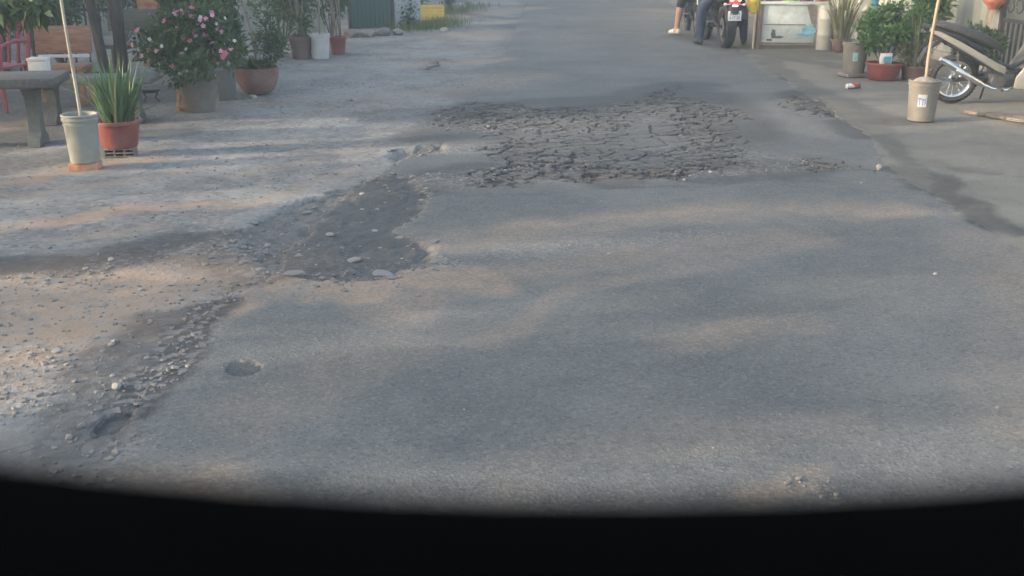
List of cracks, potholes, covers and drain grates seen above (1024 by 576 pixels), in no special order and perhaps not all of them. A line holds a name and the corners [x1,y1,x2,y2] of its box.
pothole [213,169,463,289]
pothole [76,401,151,444]
crack [393,55,899,195]
pothole [208,355,278,383]
